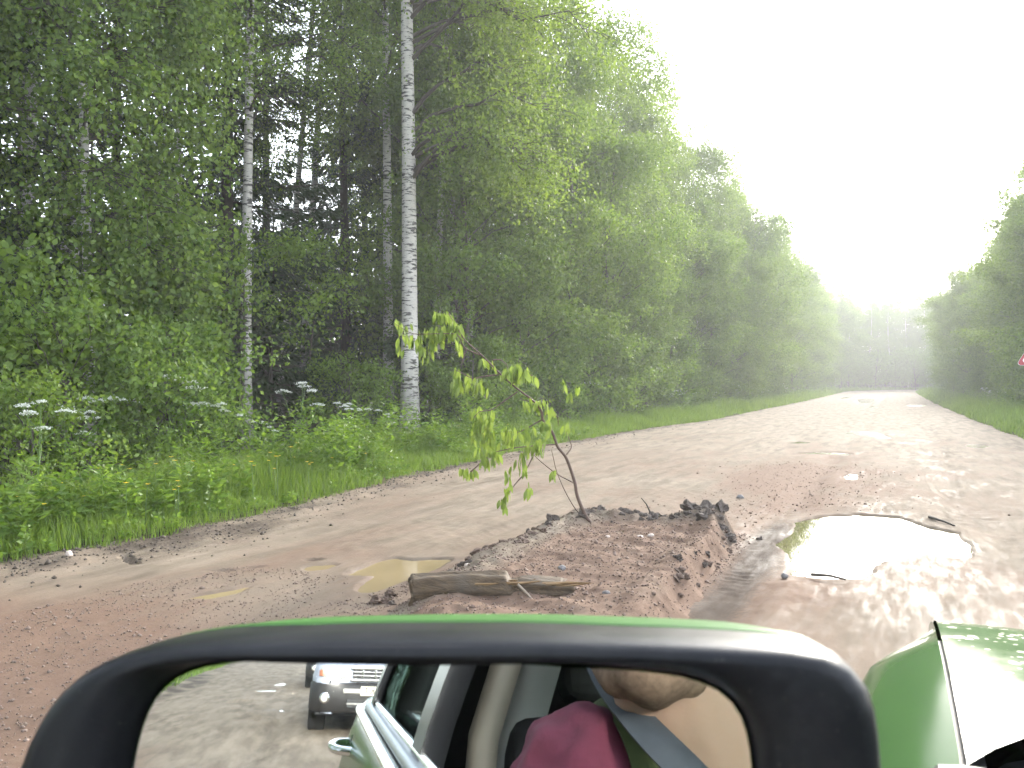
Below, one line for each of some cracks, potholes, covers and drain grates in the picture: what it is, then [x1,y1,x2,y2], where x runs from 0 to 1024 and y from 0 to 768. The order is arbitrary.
pothole [335,555,458,594]
pothole [300,561,343,572]
pothole [771,512,980,581]
pothole [177,583,259,600]
pothole [840,472,861,481]
